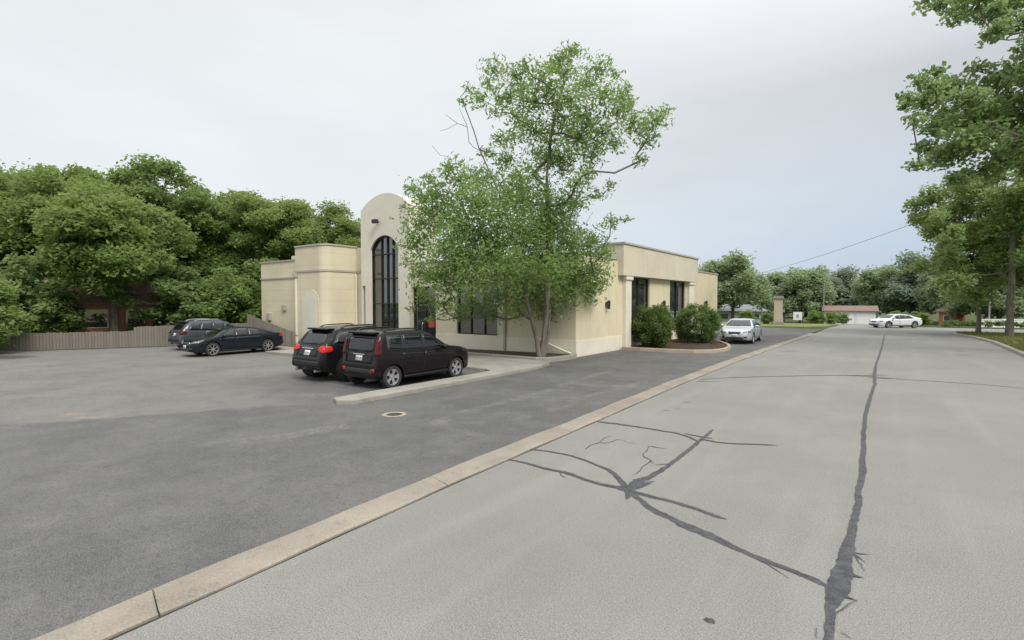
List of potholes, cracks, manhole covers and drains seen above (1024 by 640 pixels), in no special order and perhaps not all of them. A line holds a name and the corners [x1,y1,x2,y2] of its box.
crack [587,436,668,475]
